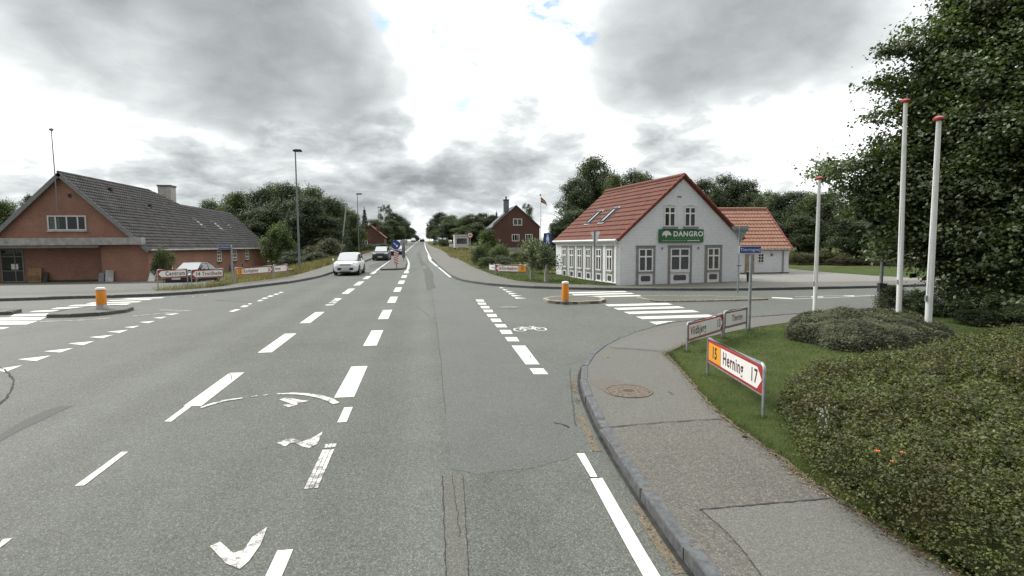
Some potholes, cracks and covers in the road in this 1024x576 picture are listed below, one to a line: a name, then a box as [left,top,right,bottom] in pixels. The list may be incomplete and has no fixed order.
manhole cover [604,384,653,398]
crack [554,368,577,427]
crack [0,367,14,404]
